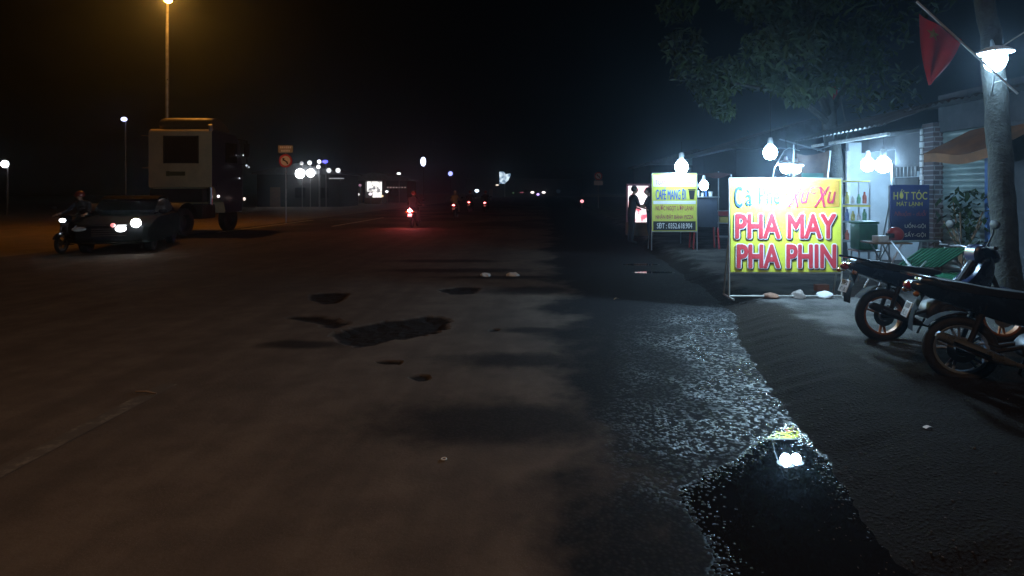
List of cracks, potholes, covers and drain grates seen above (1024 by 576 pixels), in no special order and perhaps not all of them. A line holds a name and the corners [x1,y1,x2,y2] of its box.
pothole [407,374,432,382]
pothole [284,314,353,329]
pothole [437,286,481,295]
pothole [307,292,351,305]
pothole [327,315,455,348]
